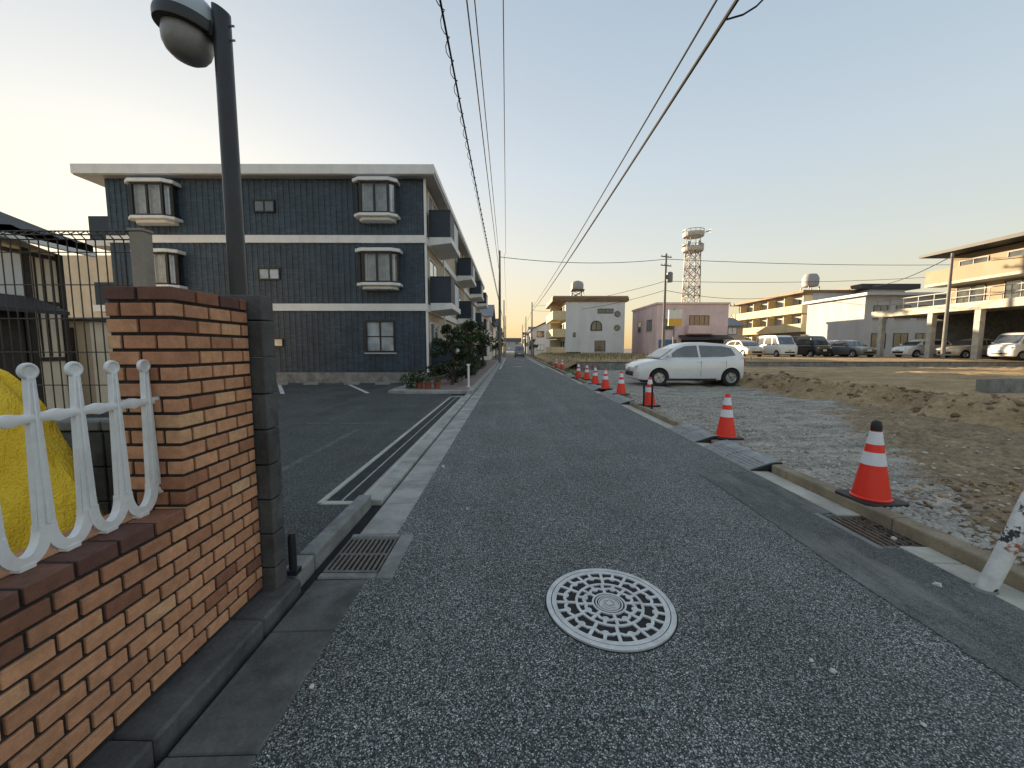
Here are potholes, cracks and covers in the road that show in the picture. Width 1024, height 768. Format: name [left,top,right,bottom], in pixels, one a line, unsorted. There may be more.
drain grate [814,513,925,549]
manhole cover [545,568,678,654]
drain grate [317,534,414,581]
